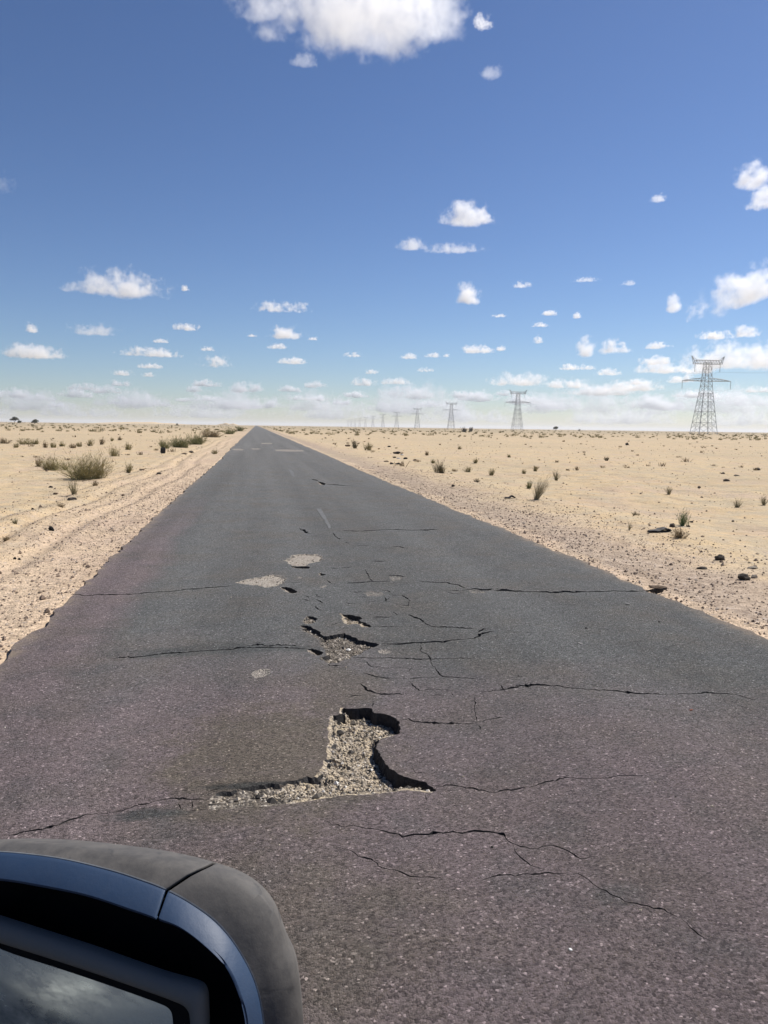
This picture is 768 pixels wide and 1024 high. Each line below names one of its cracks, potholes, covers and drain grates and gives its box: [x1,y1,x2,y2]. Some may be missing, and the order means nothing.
crack [327,821,710,941]
pothole [339,613,372,627]
crack [406,766,637,800]
pothole [300,625,379,664]
crack [296,567,753,728]
crack [8,789,216,836]
crack [113,644,305,659]
pothole [208,708,436,810]
